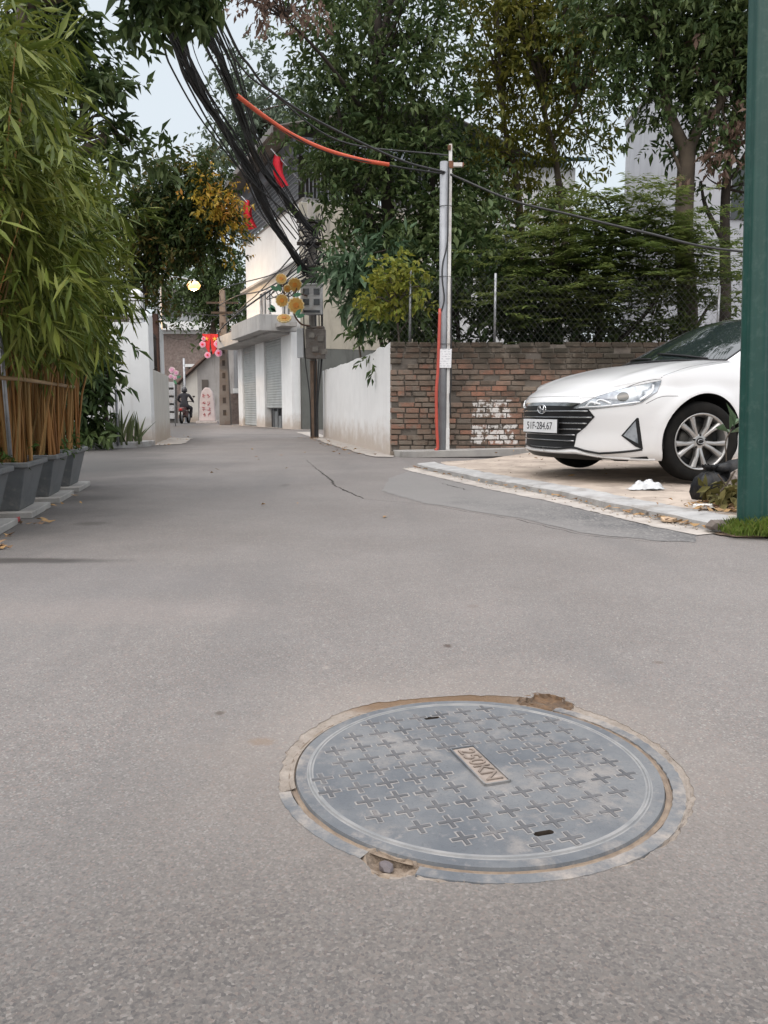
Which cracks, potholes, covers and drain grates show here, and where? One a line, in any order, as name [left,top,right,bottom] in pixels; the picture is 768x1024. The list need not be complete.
manhole cover [278,694,696,885]
crack [307,461,665,542]
